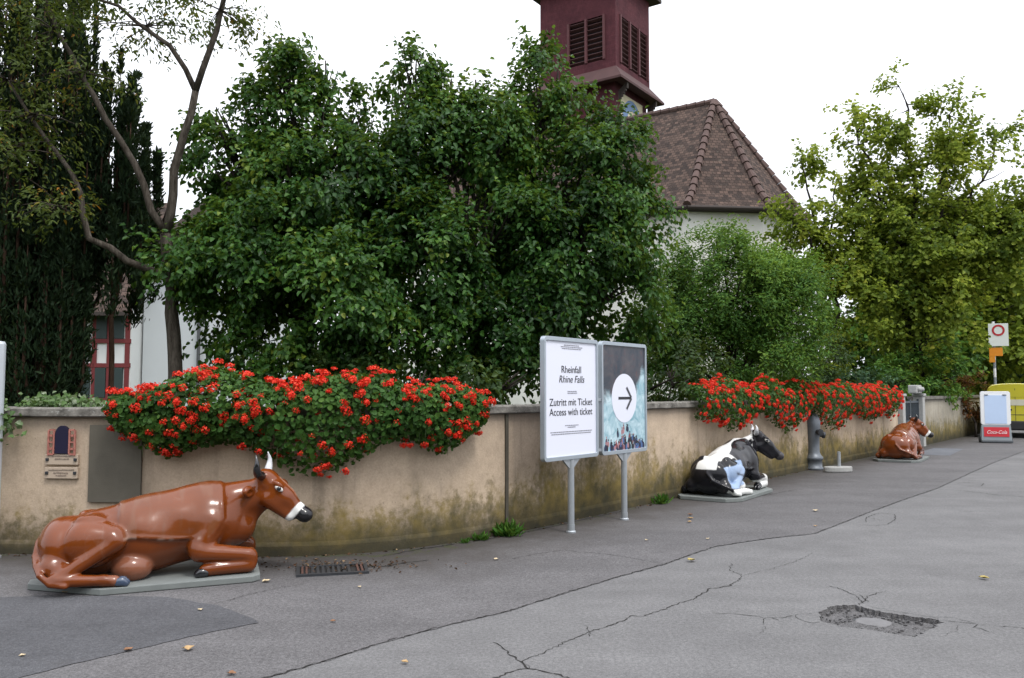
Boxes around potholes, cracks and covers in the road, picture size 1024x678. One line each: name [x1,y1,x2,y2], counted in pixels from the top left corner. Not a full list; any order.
crack [493,558,802,678]
drain grate [296,563,369,577]
pothole [818,605,944,637]
